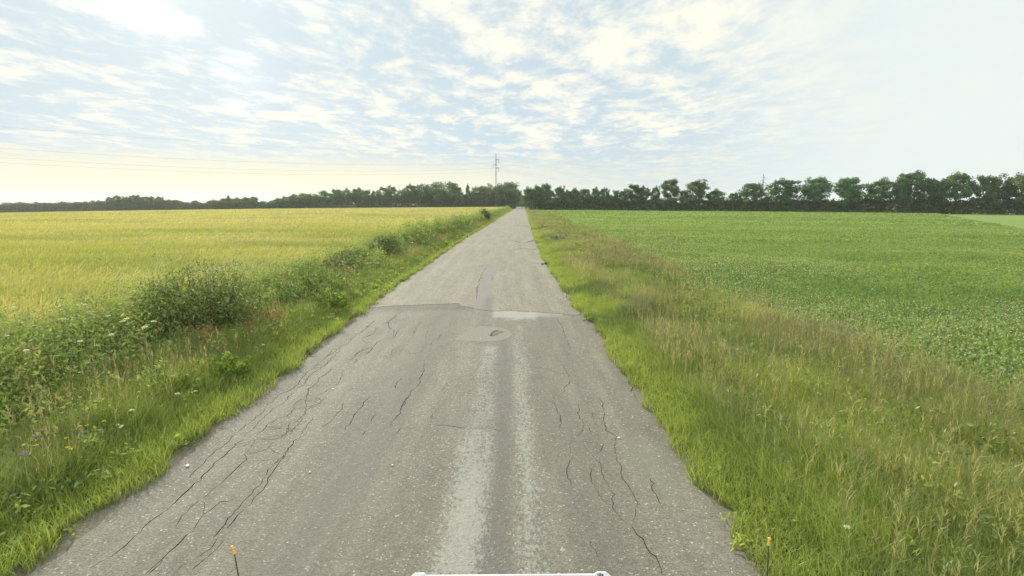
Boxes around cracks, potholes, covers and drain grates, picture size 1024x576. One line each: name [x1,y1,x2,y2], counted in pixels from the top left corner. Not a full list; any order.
crack [94,308,451,575]
crack [535,357,666,573]
